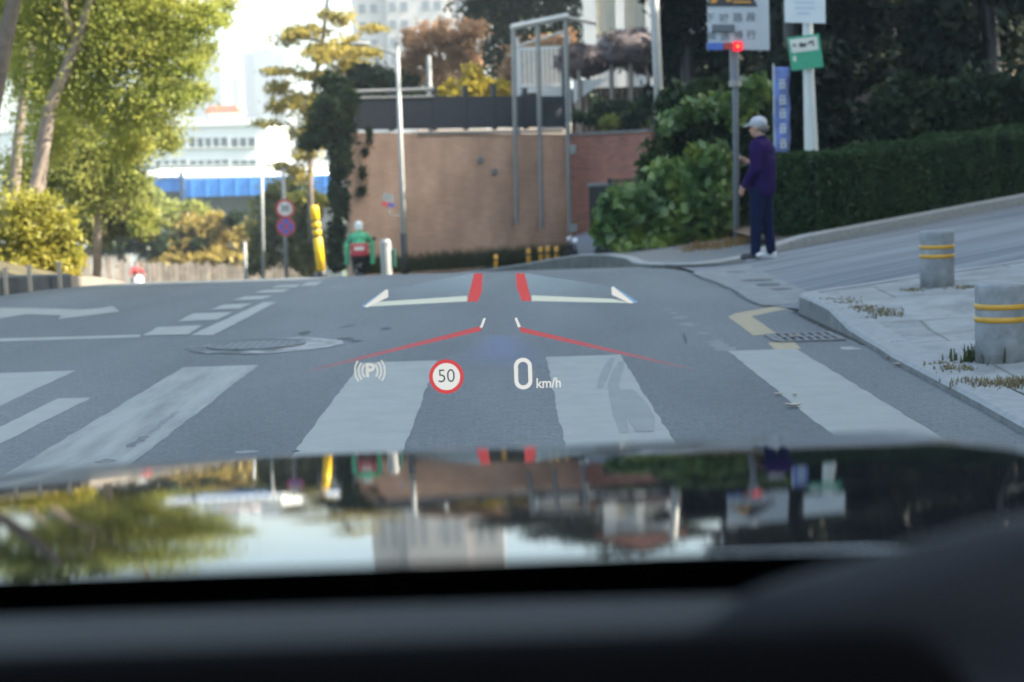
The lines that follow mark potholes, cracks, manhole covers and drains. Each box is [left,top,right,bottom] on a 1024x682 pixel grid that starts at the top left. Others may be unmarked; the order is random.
manhole cover [185,337,344,354]
drain grate [764,331,846,343]
